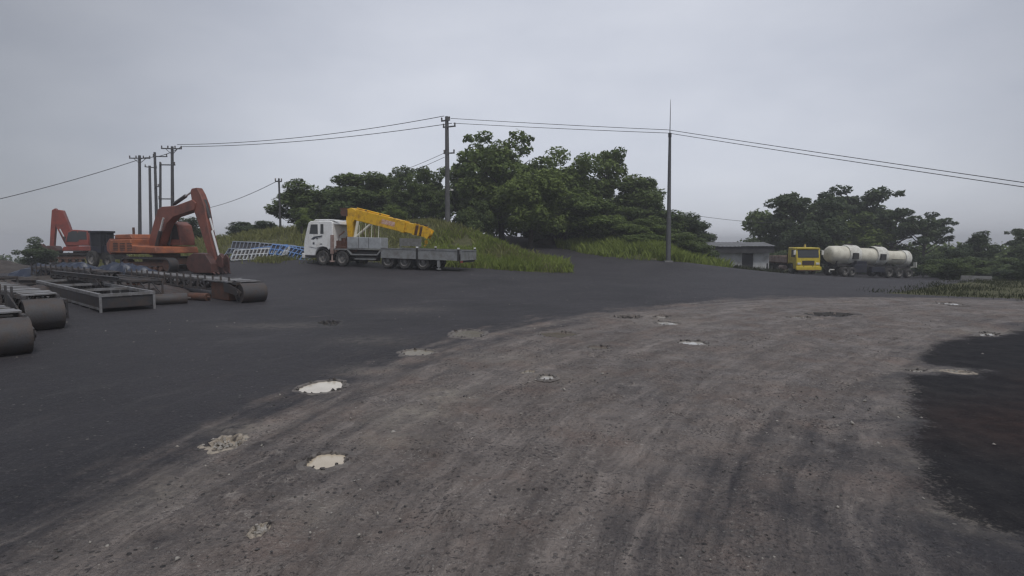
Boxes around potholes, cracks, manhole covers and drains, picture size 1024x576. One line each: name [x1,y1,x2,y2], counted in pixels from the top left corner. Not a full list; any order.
pothole [246,522,271,539]
pothole [292,377,350,395]
pothole [296,450,355,474]
pothole [396,348,439,357]
pothole [447,328,489,339]
pothole [197,433,249,454]
pothole [536,374,560,382]
